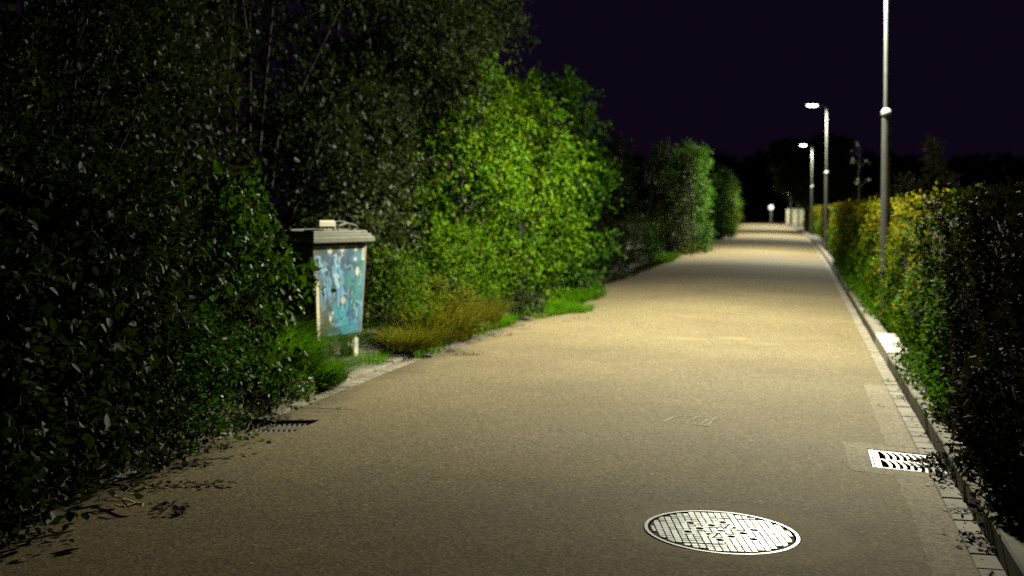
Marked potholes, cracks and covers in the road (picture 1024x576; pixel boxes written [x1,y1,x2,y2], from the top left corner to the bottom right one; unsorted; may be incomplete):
drain grate [867,449,947,474]
manhole cover [644,510,801,555]
drain grate [247,423,312,433]
